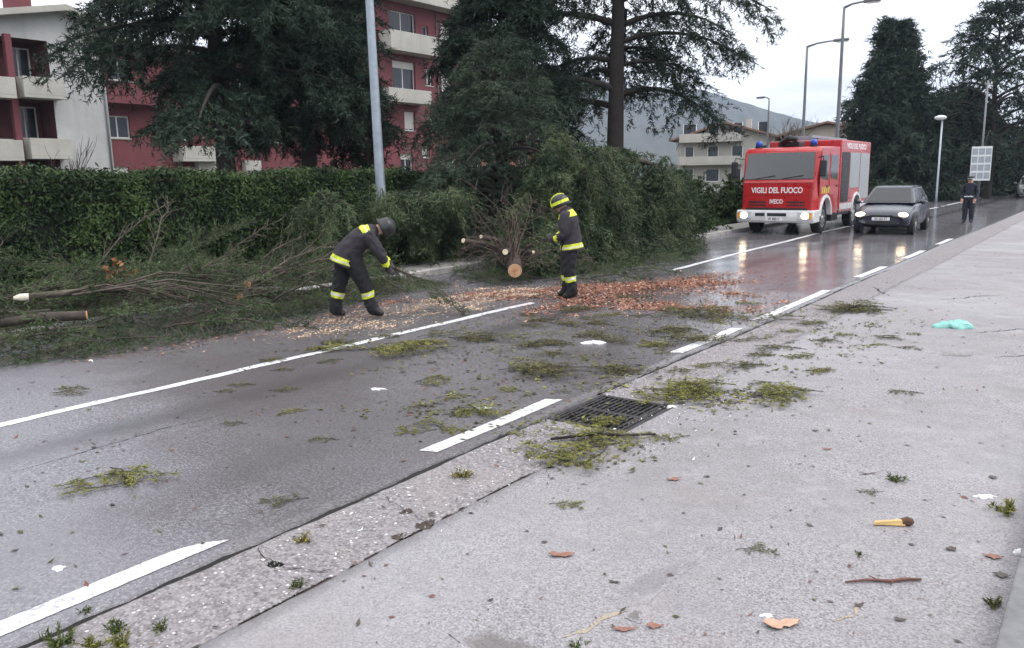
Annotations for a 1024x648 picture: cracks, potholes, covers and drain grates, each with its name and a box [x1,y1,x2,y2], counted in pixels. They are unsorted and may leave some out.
drain grate [547,394,673,433]
